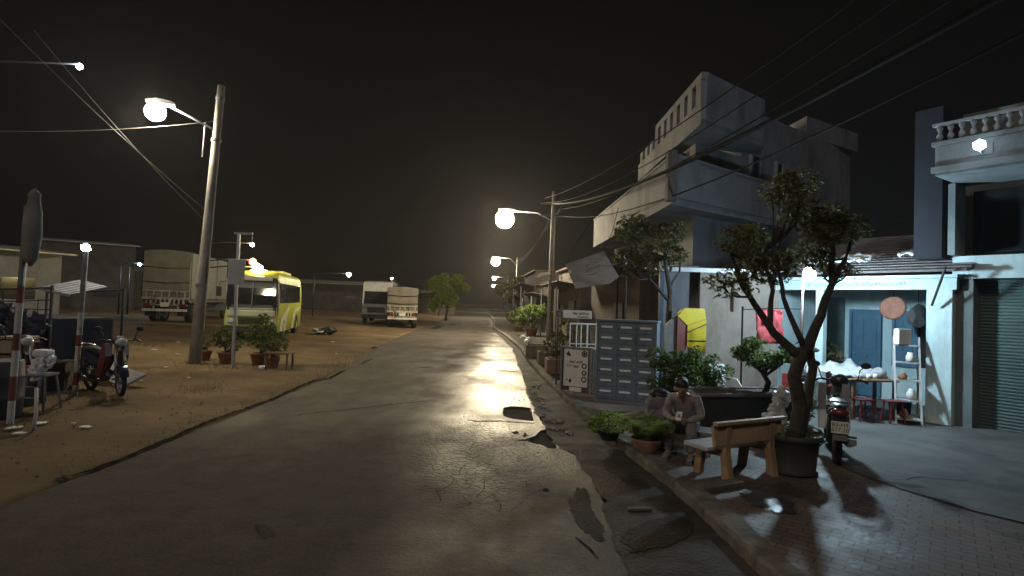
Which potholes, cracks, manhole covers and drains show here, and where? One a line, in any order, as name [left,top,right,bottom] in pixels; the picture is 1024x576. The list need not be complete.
pothole [516,428,561,452]
crack [417,420,545,512]
pothole [495,405,539,423]
